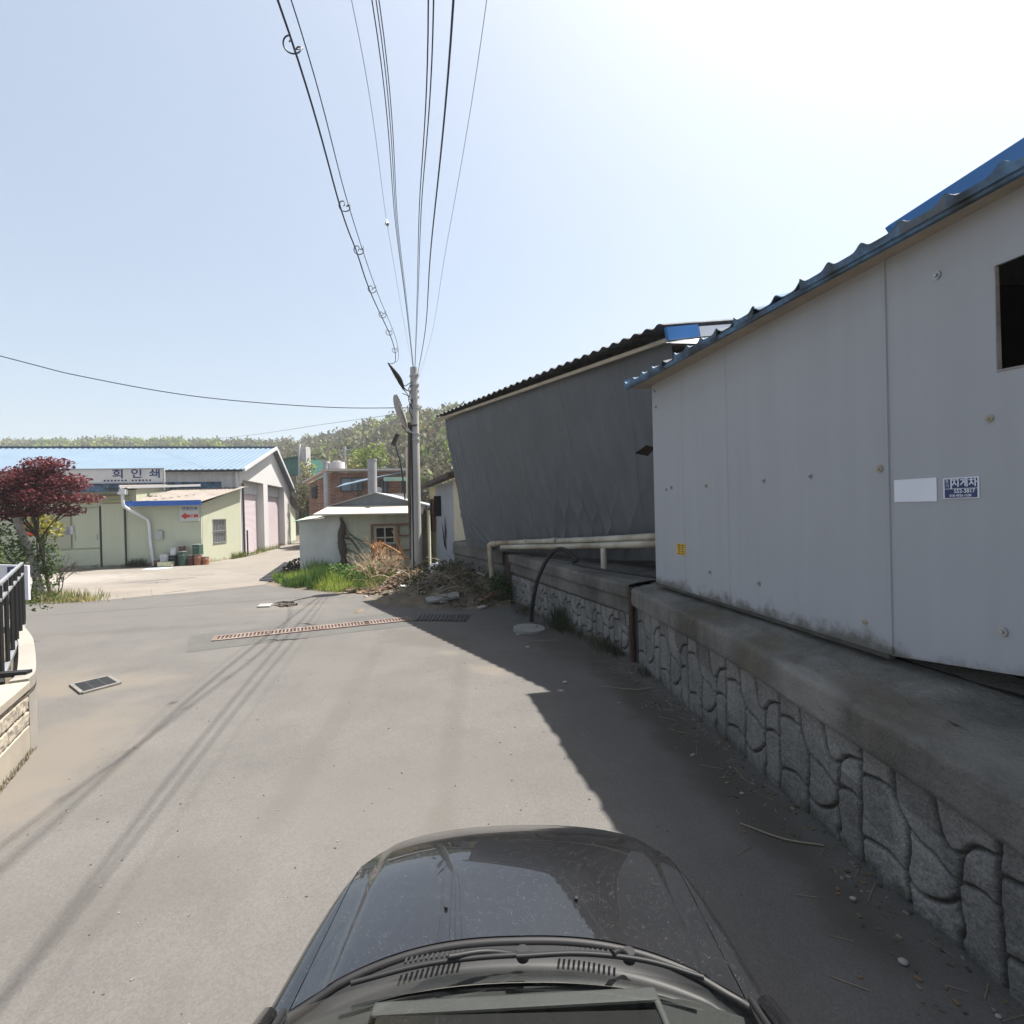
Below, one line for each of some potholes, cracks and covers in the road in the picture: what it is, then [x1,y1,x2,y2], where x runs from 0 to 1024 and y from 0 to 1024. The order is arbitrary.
drain grate [69,675,122,695]
manhole cover [513,624,545,634]
